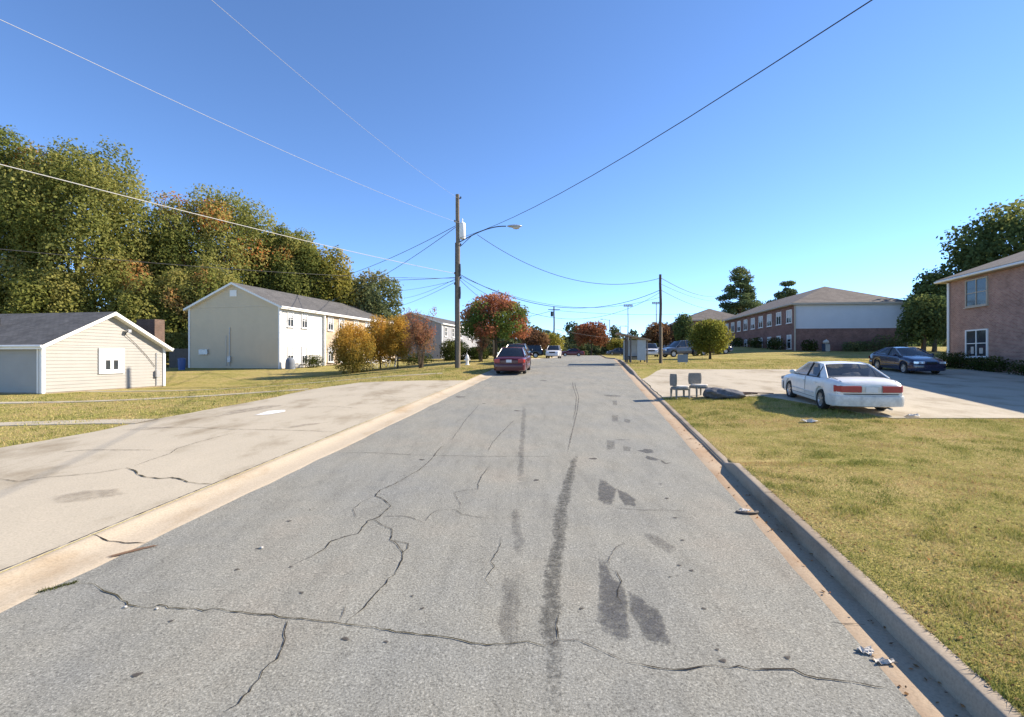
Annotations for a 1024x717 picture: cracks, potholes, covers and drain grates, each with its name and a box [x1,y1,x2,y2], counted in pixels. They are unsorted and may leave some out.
crack [5,436,219,484]
crack [92,416,546,707]
crack [552,615,881,687]
